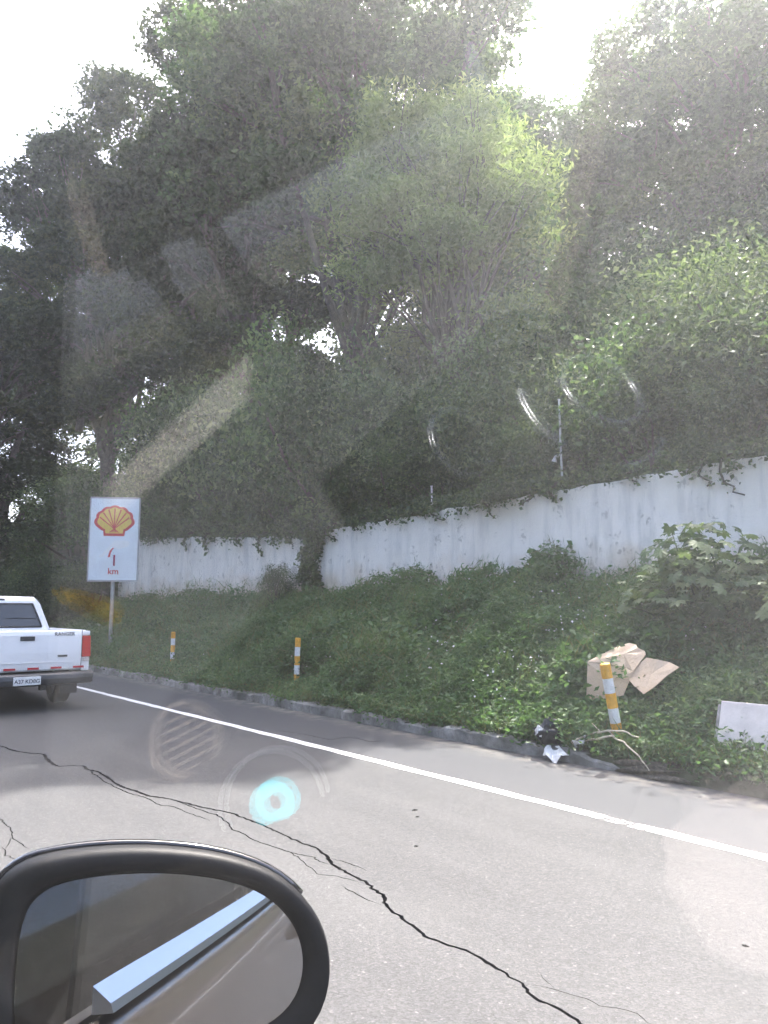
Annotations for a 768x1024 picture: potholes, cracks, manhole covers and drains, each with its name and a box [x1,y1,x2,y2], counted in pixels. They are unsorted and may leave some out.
crack [0,745,651,1024]
